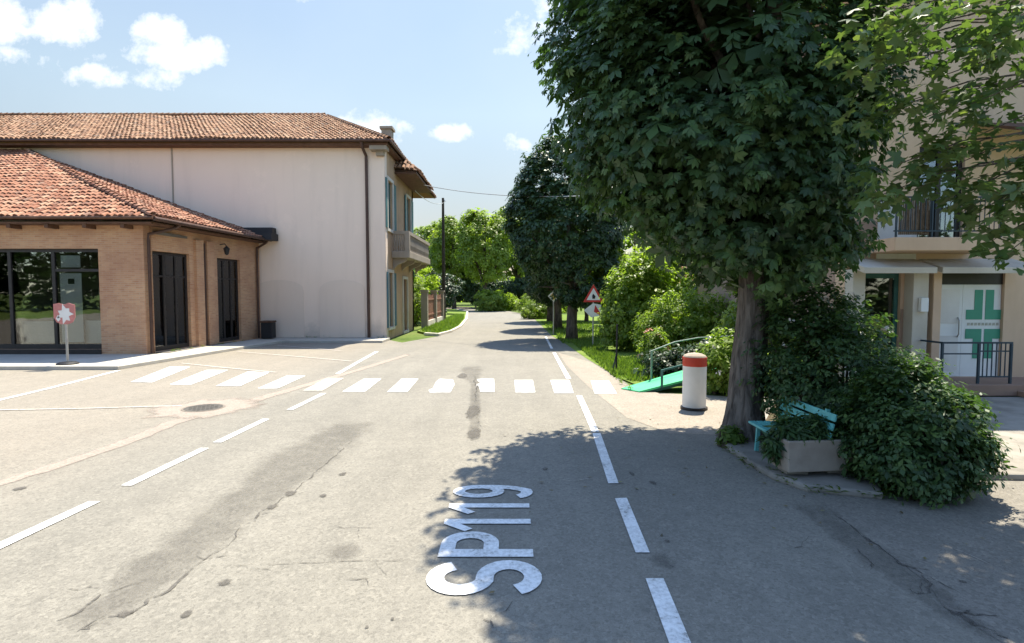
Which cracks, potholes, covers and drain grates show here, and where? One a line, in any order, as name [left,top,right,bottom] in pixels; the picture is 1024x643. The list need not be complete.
manhole cover [181,404,226,412]
crack [58,441,403,630]
crack [835,514,1008,639]
